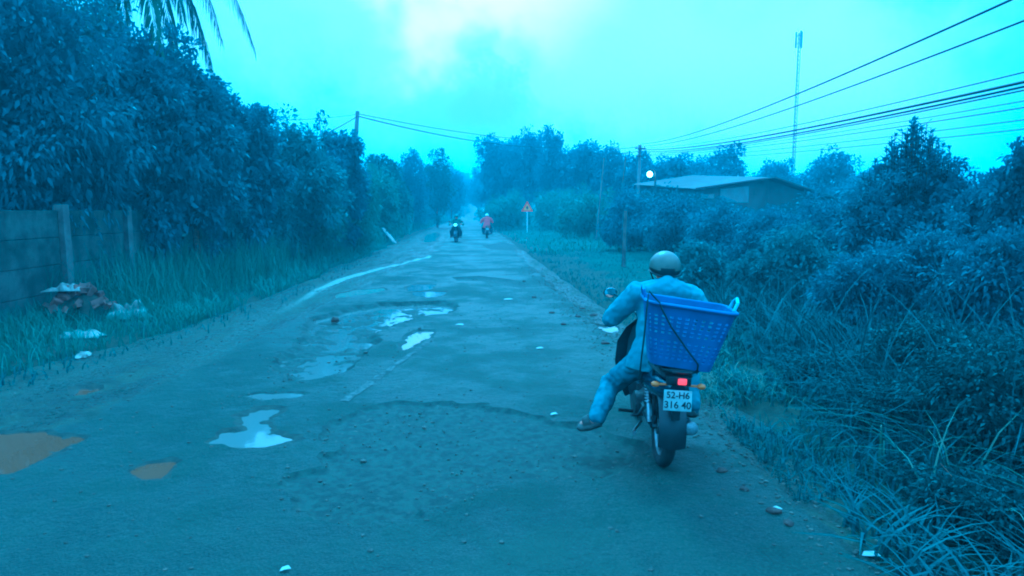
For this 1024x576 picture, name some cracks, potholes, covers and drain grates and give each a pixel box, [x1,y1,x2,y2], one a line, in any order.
pothole [268,300,460,383]
pothole [204,405,307,449]
pothole [404,283,437,291]
